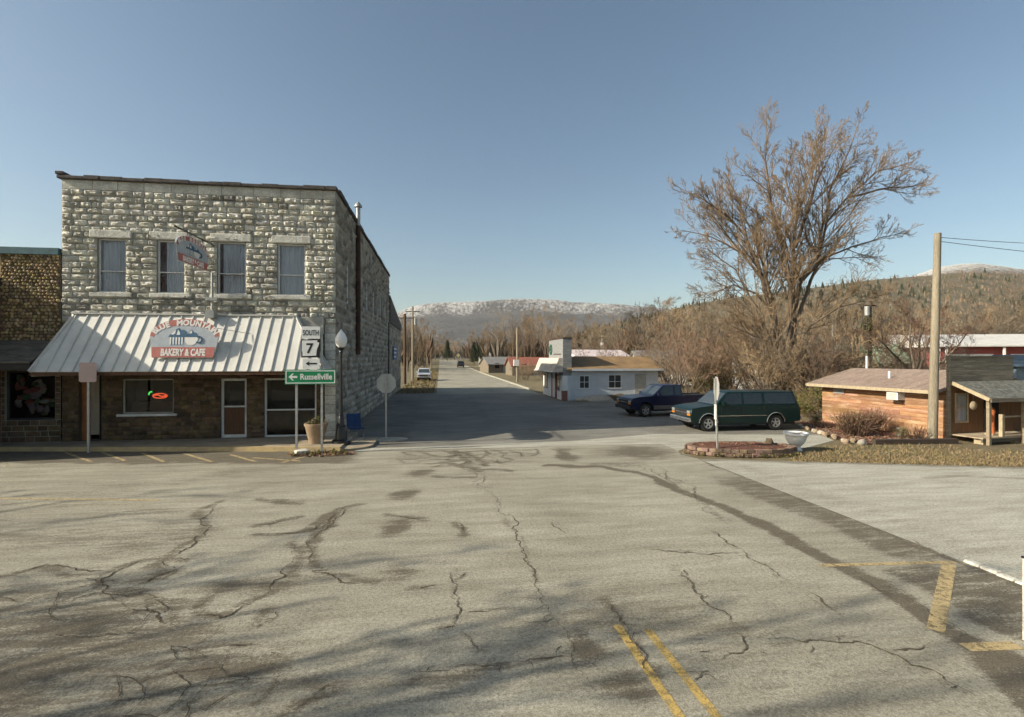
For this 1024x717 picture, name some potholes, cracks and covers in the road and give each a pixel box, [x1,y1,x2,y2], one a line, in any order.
crack [188,500,362,710]
crack [94,627,290,717]
crack [397,449,594,689]
crack [676,565,972,693]
crack [0,503,214,637]
